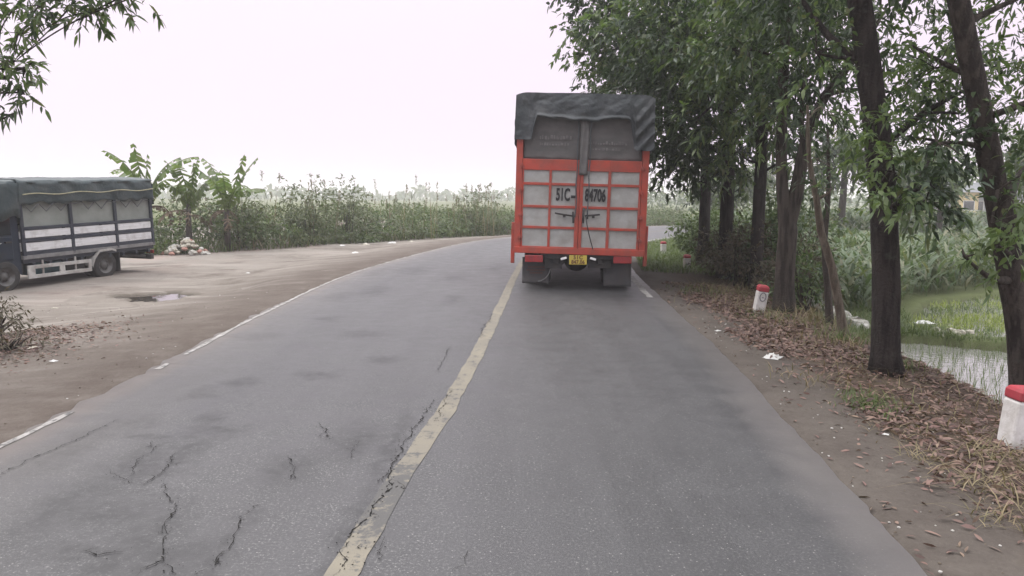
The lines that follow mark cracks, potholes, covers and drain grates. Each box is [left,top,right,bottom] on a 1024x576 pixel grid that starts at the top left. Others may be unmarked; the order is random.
crack [195,503,257,574]
crack [106,438,184,575]
crack [328,390,450,571]
